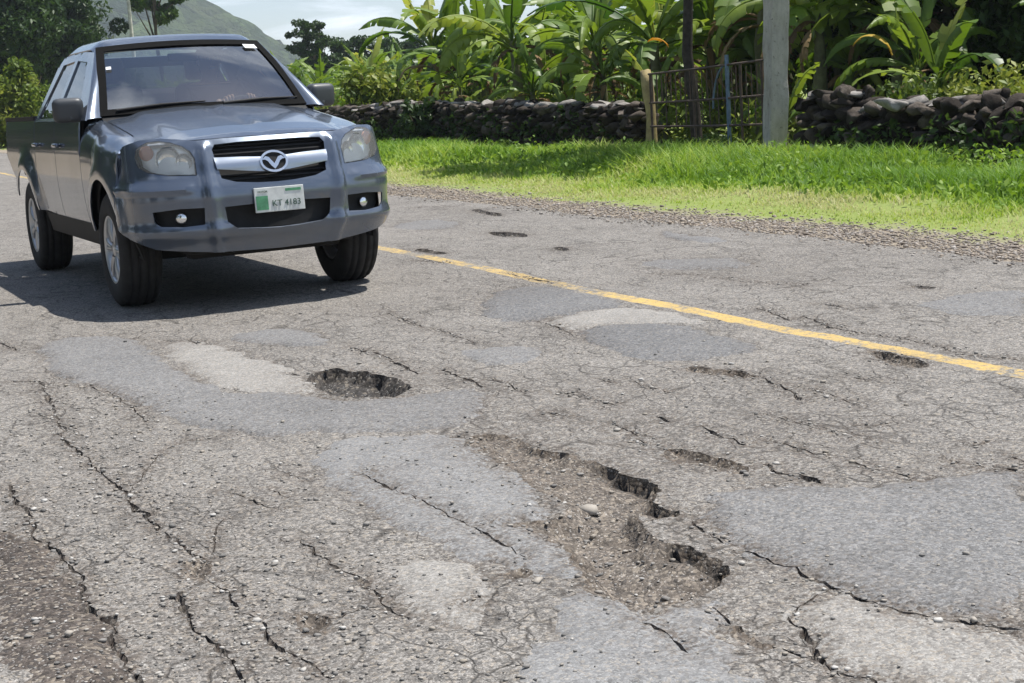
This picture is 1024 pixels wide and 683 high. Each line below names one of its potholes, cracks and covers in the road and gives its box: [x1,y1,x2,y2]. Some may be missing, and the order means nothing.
pothole [686,366,760,379]
crack [761,377,861,436]
pothole [664,449,750,474]
crack [762,441,827,476]
crack [17,381,224,559]
crack [173,580,331,683]
crack [300,539,410,620]
crack [8,485,144,683]
crack [353,347,418,374]
crack [692,521,1020,683]
